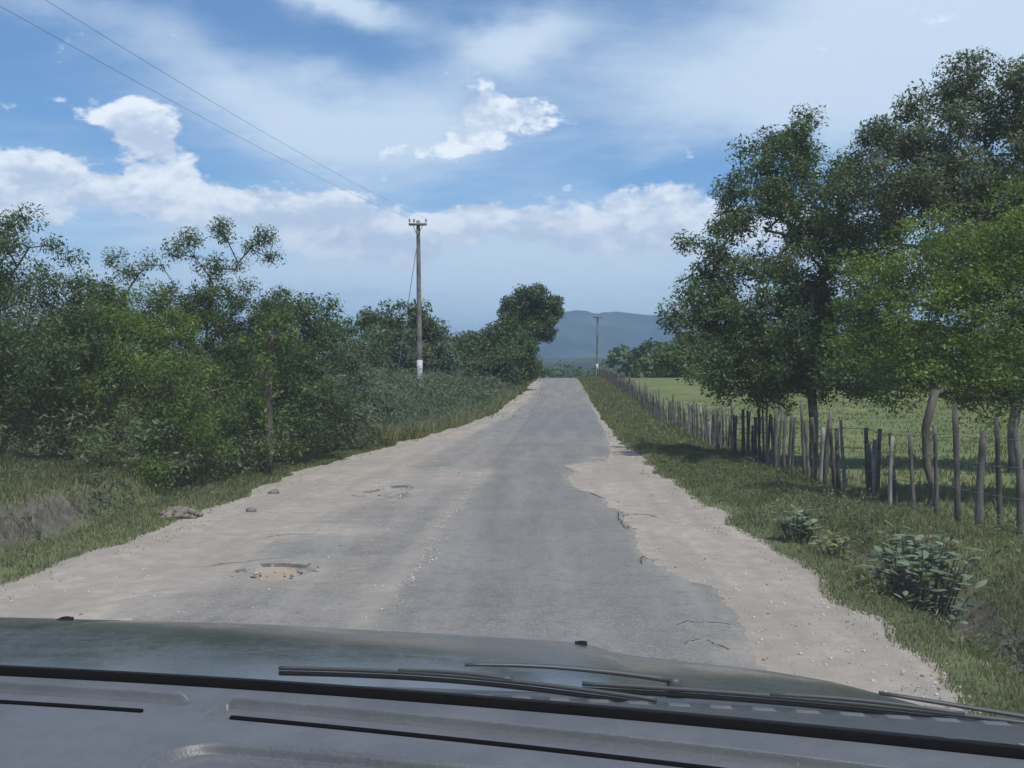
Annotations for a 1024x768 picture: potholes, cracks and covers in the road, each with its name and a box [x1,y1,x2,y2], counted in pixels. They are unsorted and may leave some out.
pothole [350,485,417,500]
crack [636,556,658,564]
pothole [234,562,324,582]
crack [195,557,290,568]
crack [587,490,657,530]
crack [676,620,736,650]
